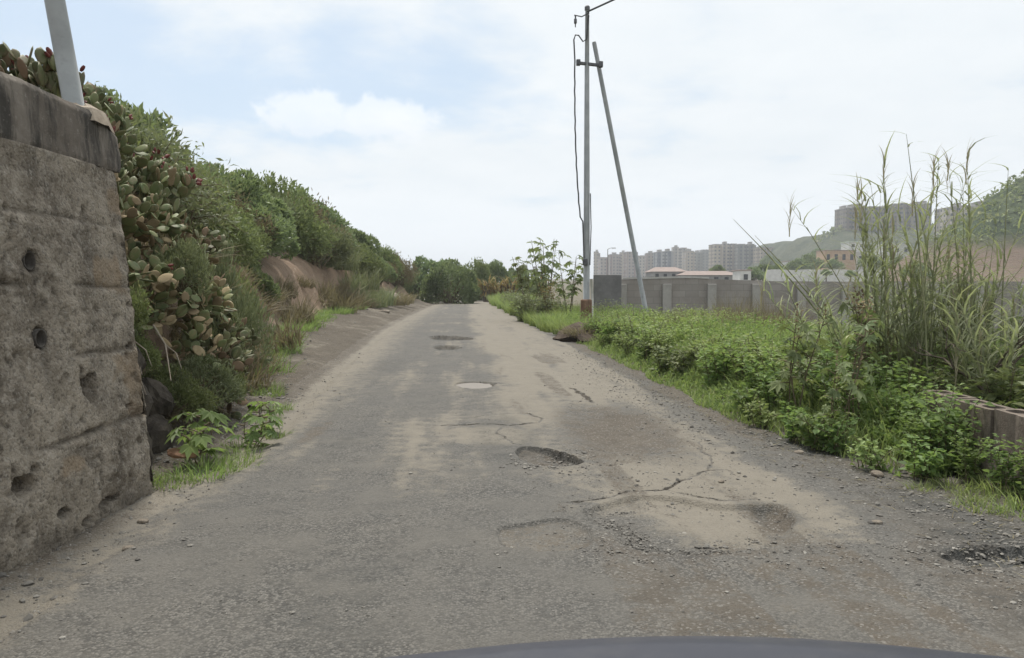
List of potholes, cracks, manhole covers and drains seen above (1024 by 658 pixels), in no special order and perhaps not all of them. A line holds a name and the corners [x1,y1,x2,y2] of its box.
pothole [581,494,801,556]
crack [441,413,543,444]
pothole [936,544,1024,568]
crack [570,388,593,403]
pothole [515,446,584,466]
crack [553,441,755,512]
